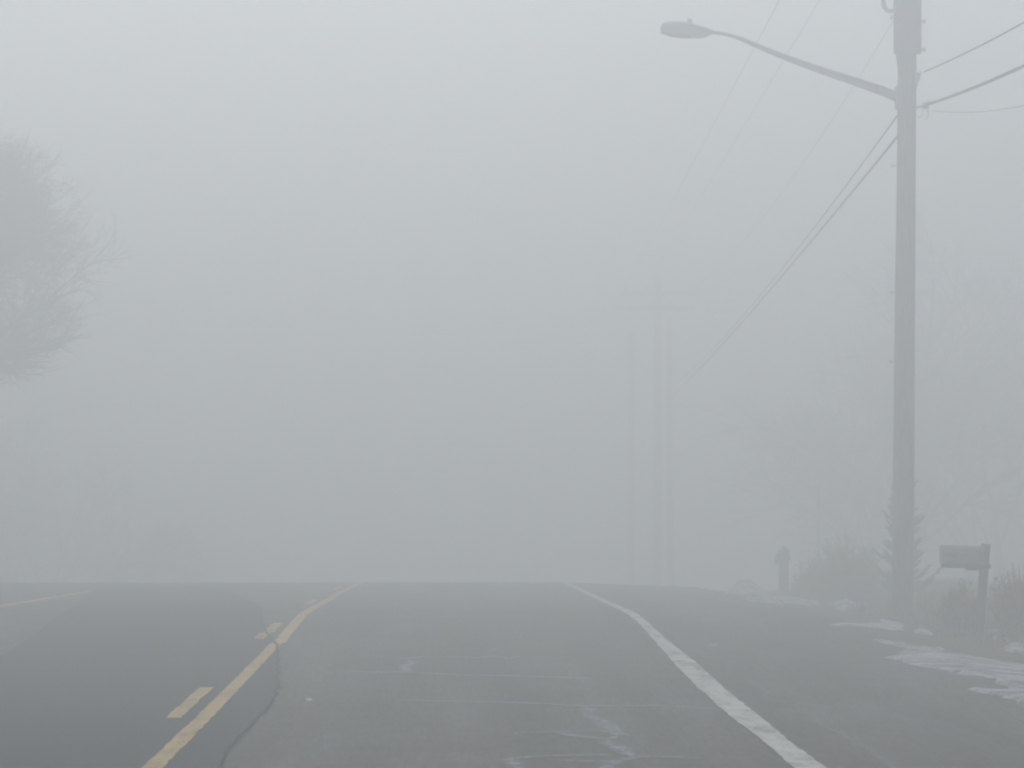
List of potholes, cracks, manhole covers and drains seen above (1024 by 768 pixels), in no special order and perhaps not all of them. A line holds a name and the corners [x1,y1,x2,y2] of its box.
crack [398,699,718,768]
crack [217,594,281,768]
crack [339,656,593,679]
